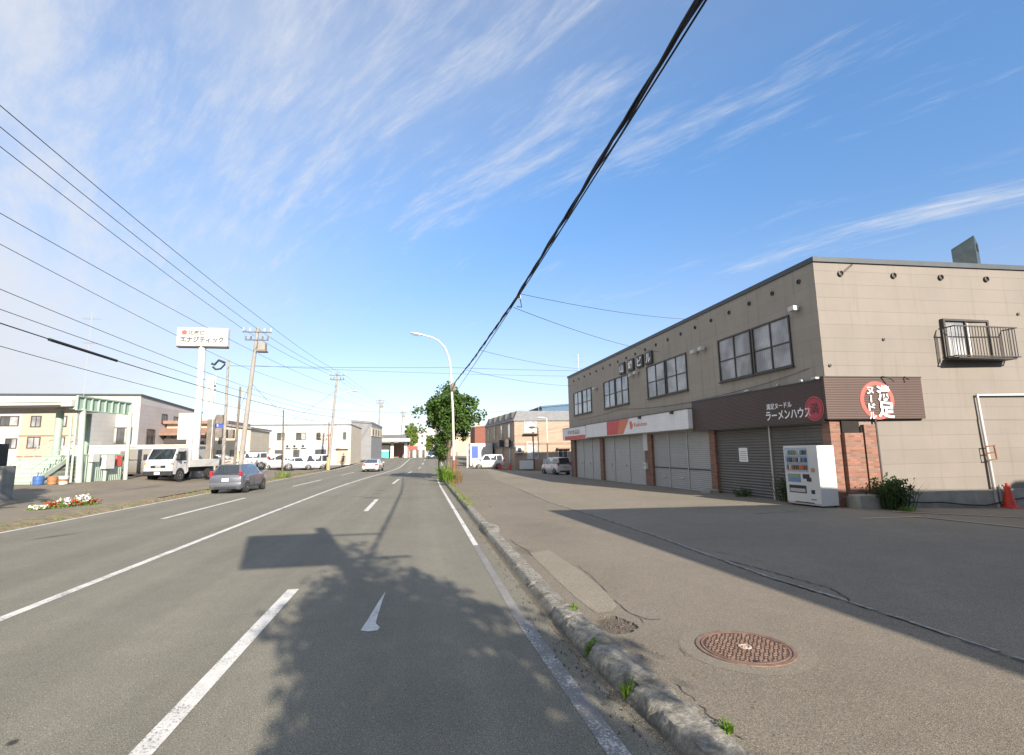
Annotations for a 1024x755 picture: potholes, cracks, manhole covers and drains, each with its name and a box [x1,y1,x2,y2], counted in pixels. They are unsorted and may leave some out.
crack [676,684,745,740]
pothole [593,615,639,635]
manhole cover [679,626,819,675]
